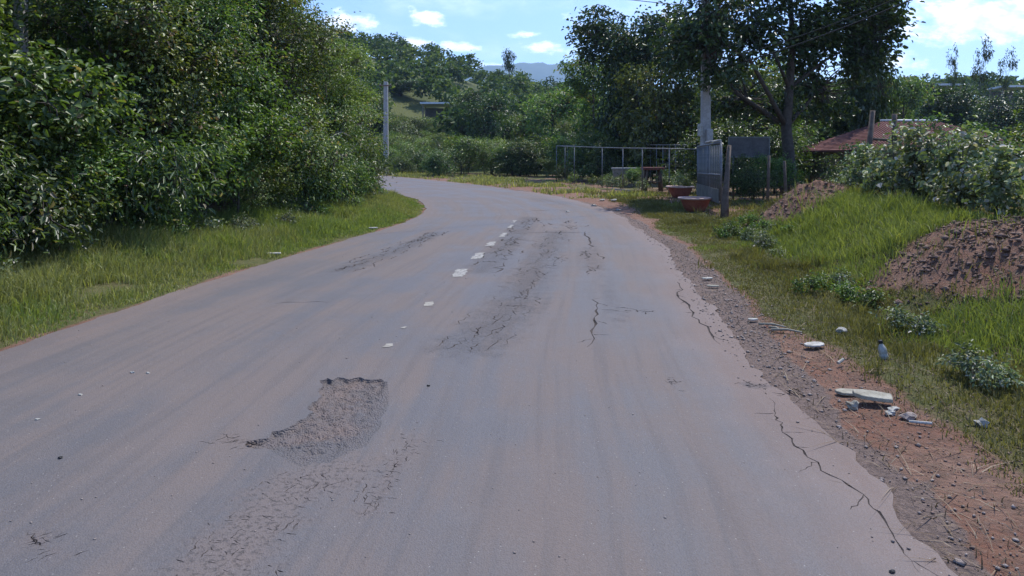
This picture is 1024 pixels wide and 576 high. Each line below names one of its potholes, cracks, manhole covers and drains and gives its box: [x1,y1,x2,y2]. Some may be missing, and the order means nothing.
crack [582,299,653,345]
crack [436,218,605,351]
pothole [245,377,389,467]
crack [339,438,444,516]
crack [676,283,725,345]
crack [335,231,449,272]
crack [735,380,938,576]
